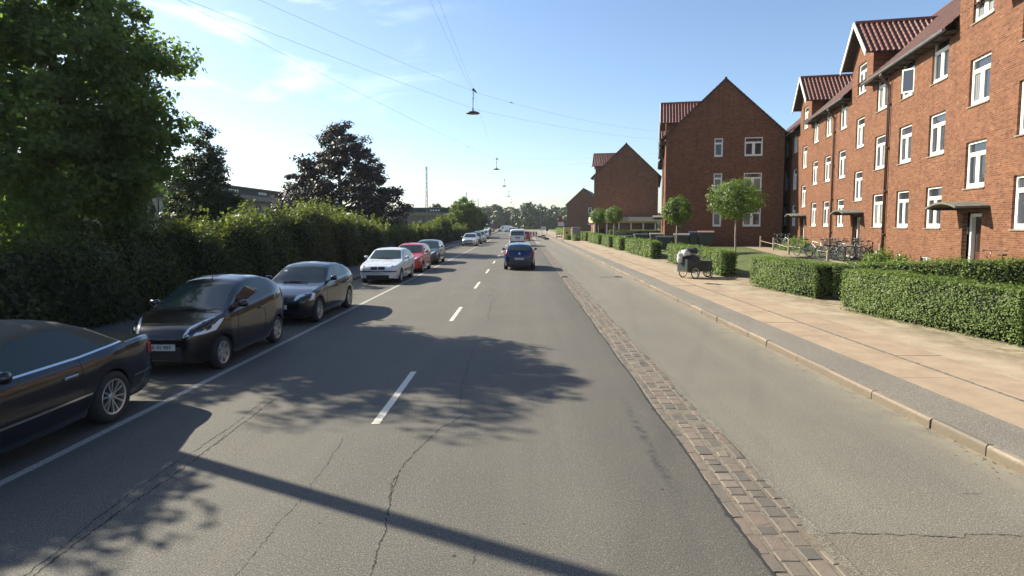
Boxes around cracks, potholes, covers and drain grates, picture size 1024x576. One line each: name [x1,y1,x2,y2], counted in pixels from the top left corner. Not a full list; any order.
crack [23,395,280,576]
crack [370,340,480,576]
crack [235,440,343,576]
